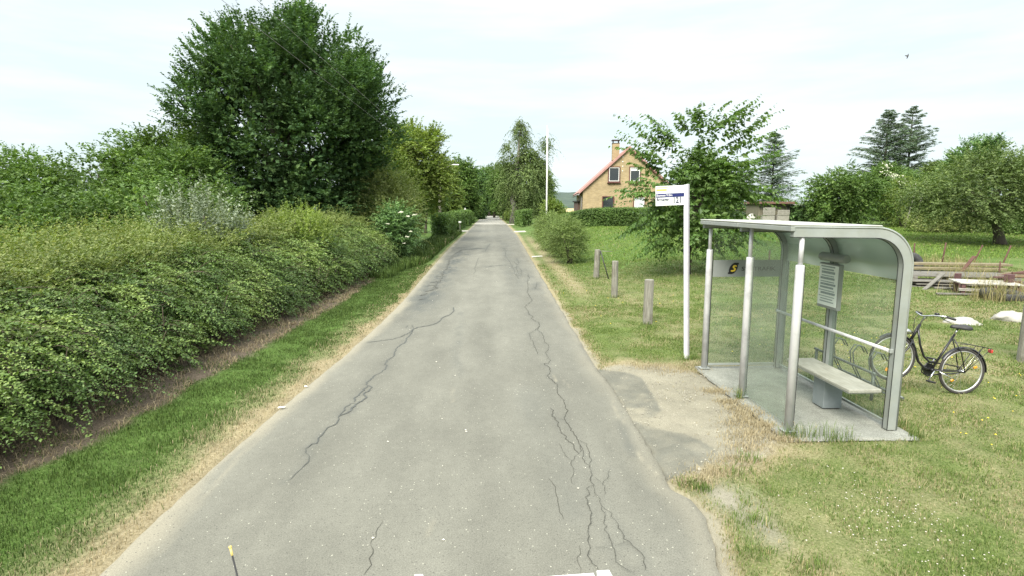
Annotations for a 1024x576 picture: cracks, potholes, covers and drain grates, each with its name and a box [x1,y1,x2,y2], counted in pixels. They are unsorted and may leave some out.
crack [419,244,537,300]
crack [526,281,646,570]
